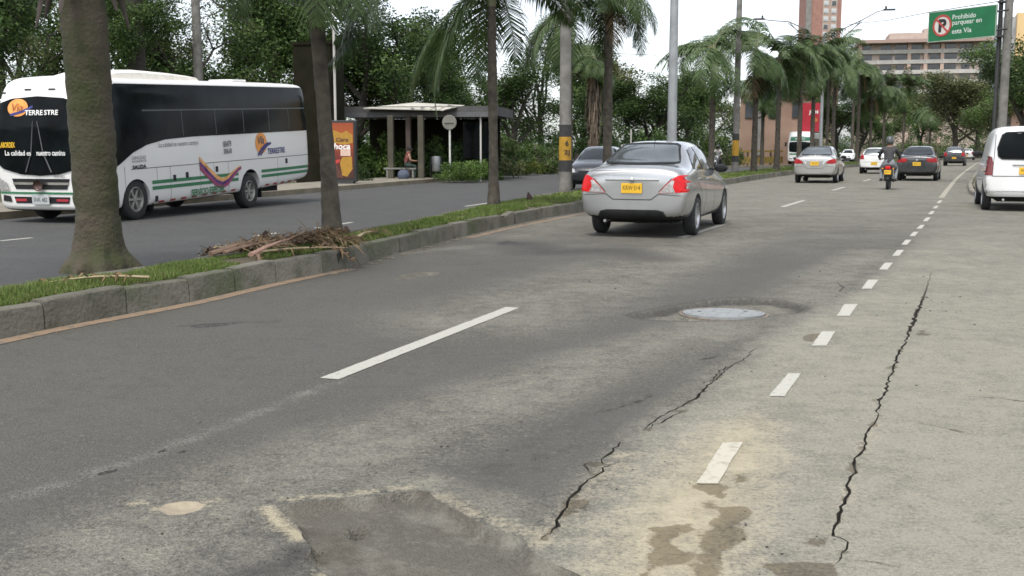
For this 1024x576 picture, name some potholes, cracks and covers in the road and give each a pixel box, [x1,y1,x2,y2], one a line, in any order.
pothole [276,490,581,576]
crack [541,441,621,539]
manhole cover [626,298,808,321]
crack [831,274,958,567]
crack [602,350,753,429]
